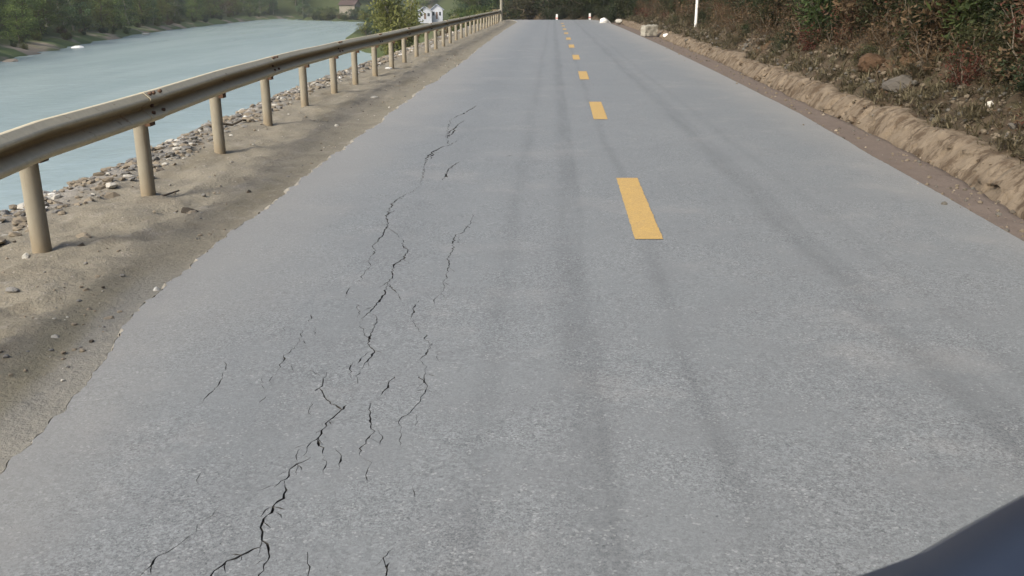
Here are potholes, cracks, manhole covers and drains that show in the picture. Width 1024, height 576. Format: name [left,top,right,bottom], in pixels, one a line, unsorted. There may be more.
crack [140,513,214,576]
crack [210,371,345,576]
crack [260,316,316,402]
crack [346,106,476,481]
